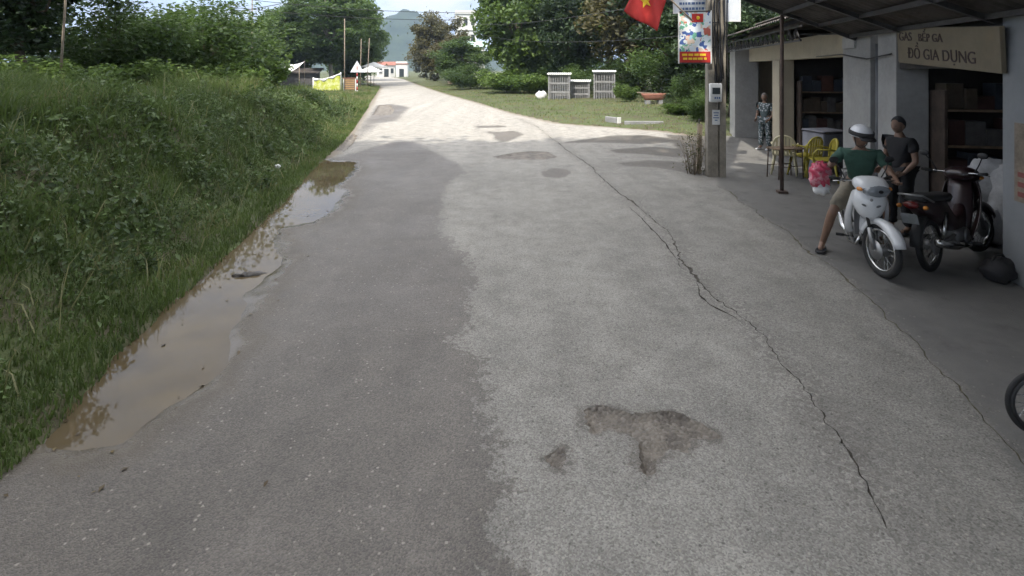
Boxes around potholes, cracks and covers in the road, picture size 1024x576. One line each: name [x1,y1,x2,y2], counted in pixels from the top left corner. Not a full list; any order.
crack [719,187,1024,467]
crack [517,118,912,545]
